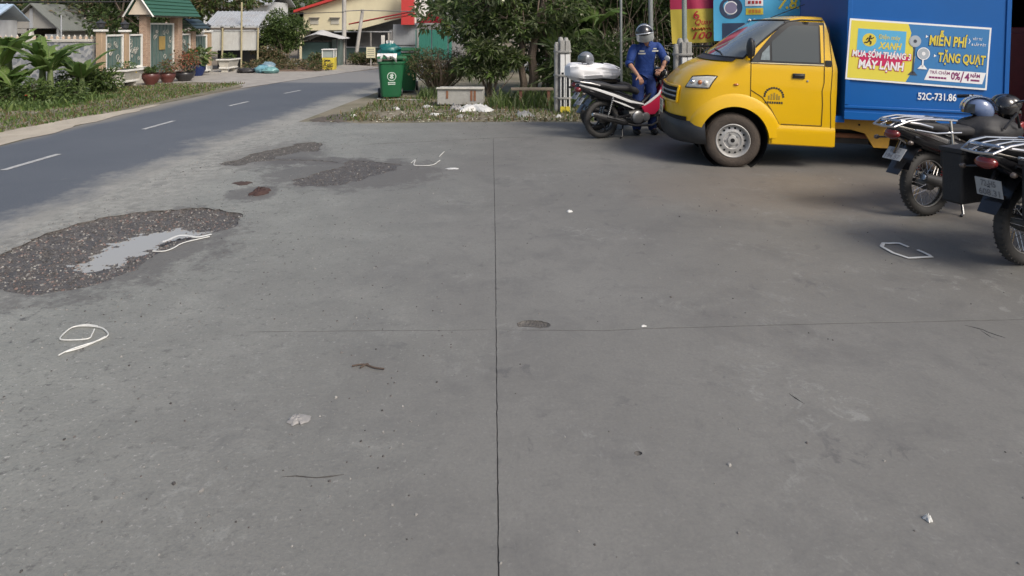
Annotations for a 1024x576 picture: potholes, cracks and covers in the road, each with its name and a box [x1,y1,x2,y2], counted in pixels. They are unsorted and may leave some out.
pothole [517,320,551,328]
pothole [0,207,243,295]
